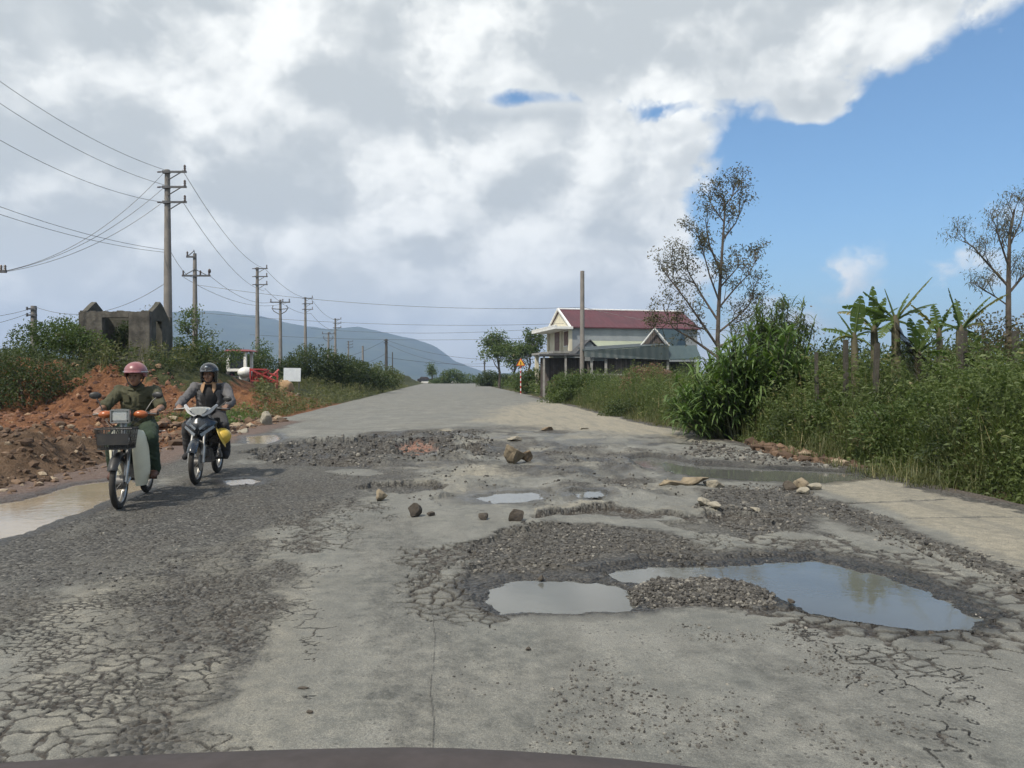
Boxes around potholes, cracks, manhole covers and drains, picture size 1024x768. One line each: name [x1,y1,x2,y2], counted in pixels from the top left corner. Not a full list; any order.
pothole [429,487,557,506]
crack [0,499,389,763]
crack [398,543,497,717]
pothole [453,443,481,452]
pothole [588,552,1005,632]
pothole [235,436,383,461]
pothole [391,437,443,456]
pothole [627,451,875,483]
crack [531,494,1024,752]
pothole [462,560,641,617]
pothole [568,488,608,500]
